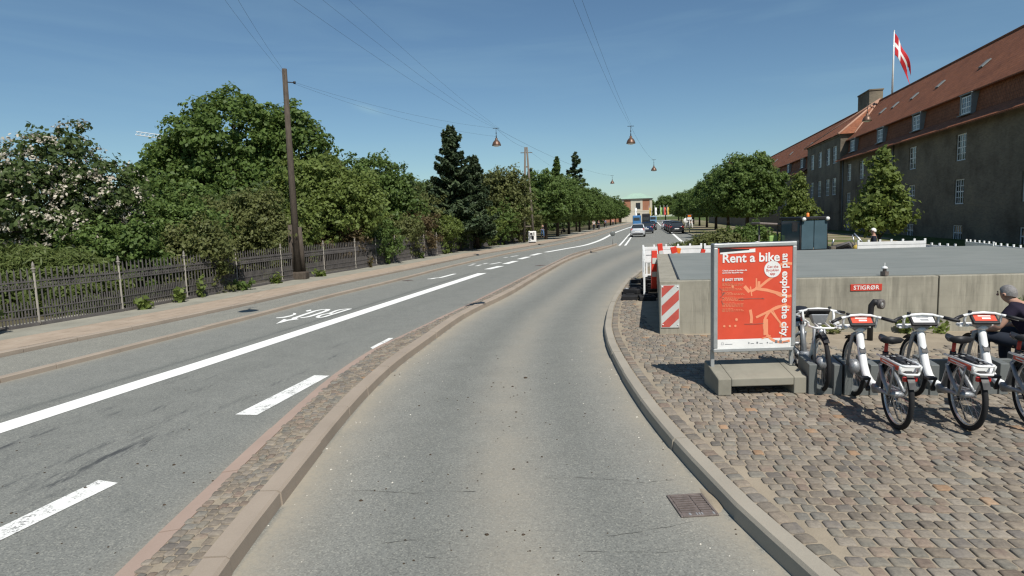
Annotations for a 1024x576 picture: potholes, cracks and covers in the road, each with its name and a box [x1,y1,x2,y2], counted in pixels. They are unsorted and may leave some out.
drain grate [667,493,719,518]
